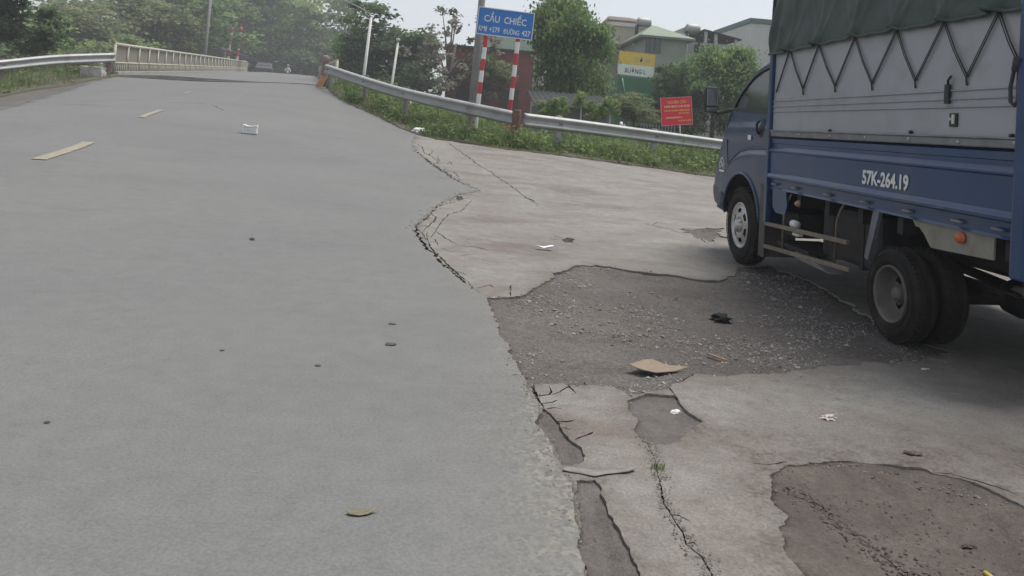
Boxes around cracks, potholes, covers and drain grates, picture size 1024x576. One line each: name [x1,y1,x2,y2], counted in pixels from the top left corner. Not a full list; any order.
crack [411,139,544,296]
crack [532,384,593,440]
pothole [574,480,640,576]
pothole [769,461,1024,576]
pothole [627,393,702,445]
pothole [487,265,948,397]
crack [647,443,713,576]
pothole [534,409,585,466]
pothole [680,228,727,242]
